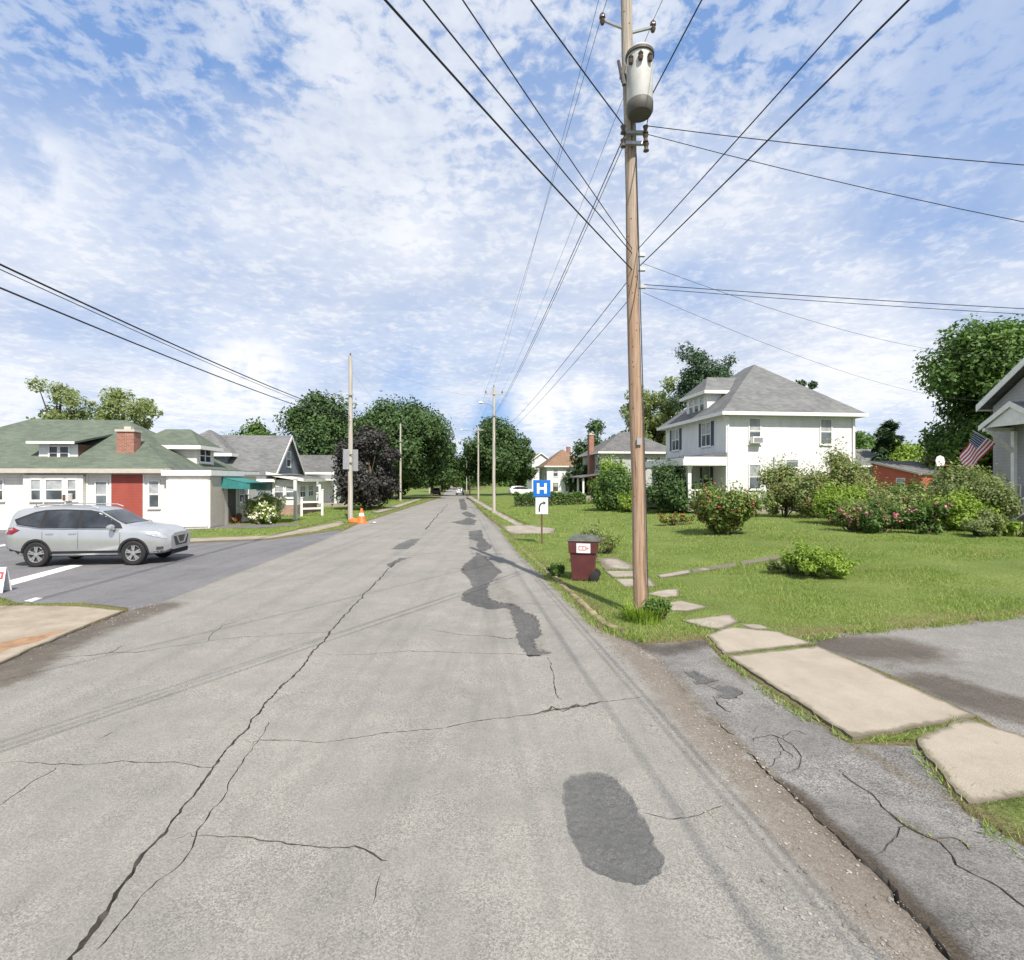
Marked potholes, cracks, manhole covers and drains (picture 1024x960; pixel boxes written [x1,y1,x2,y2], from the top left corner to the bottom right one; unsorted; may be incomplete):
crack [753,731,806,773]
crack [843,774,1024,907]
crack [0,504,640,960]
crack [646,806,721,820]
